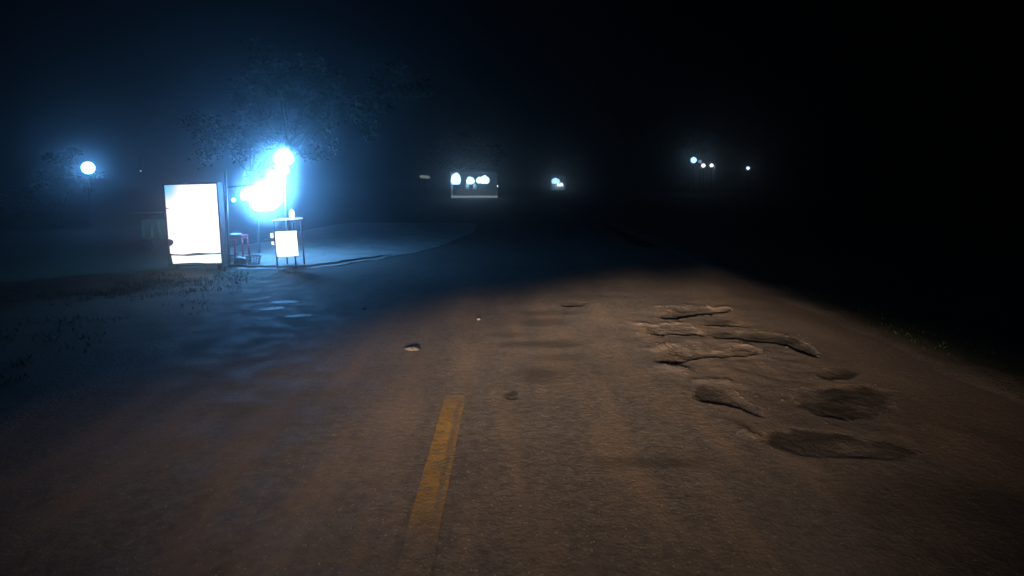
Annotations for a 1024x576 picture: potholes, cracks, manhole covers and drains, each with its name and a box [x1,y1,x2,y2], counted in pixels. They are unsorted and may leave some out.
pothole [659,306,731,320]
pothole [503,390,520,401]
pothole [813,368,861,381]
pothole [788,384,899,421]
pothole [752,426,919,462]
pothole [645,323,821,358]
pothole [651,344,764,364]
pothole [691,383,764,418]
